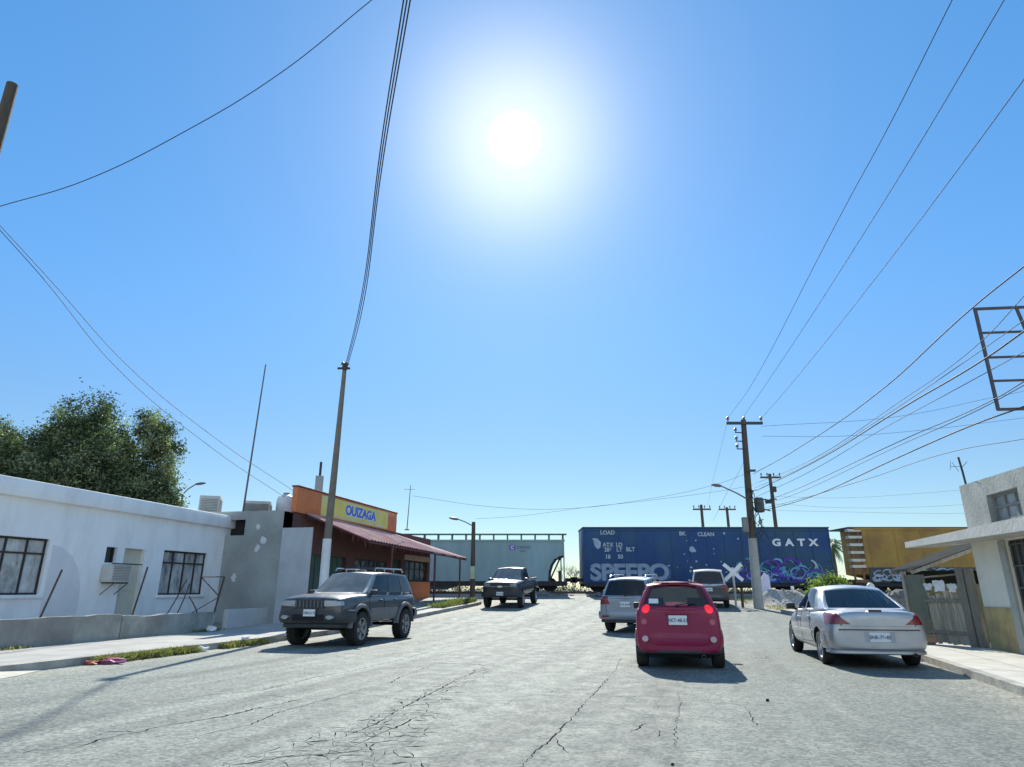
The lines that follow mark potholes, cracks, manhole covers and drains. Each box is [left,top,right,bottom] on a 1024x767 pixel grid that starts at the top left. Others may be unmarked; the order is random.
crack [631,692,771,752]
crack [522,658,635,767]
crack [1,641,492,767]
